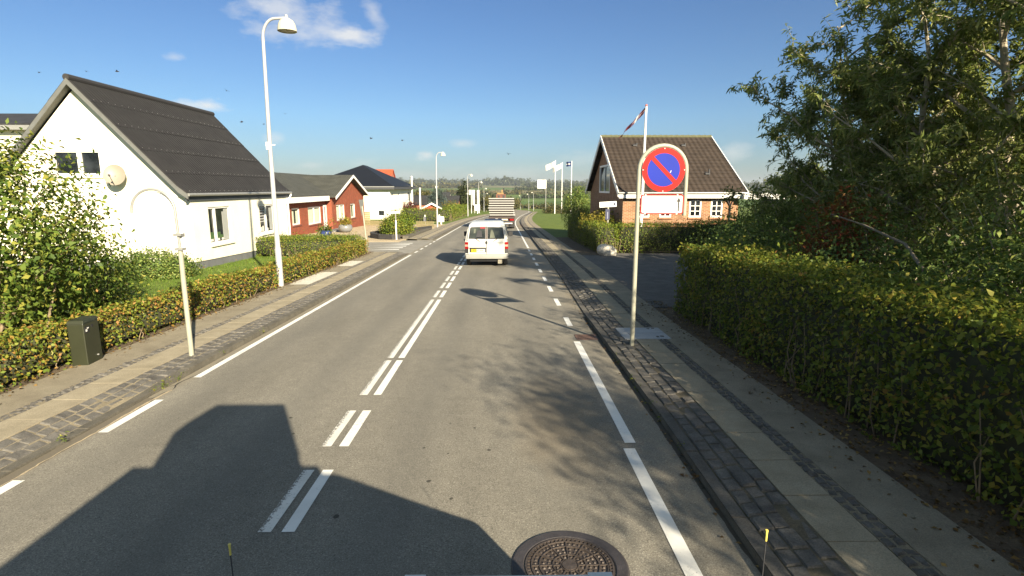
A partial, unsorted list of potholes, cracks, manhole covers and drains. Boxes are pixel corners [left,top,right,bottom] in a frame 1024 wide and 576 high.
manhole cover [511,531,630,576]
